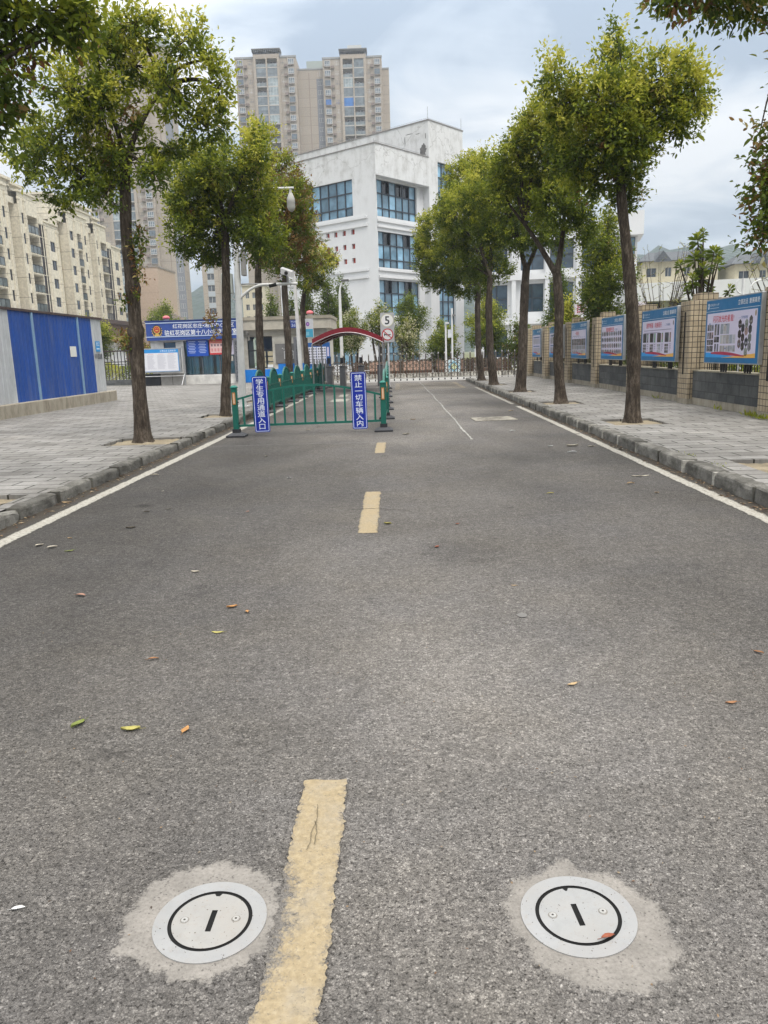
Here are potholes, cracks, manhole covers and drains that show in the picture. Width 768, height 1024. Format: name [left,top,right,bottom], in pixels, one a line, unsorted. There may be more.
crack [306,804,318,850]
manhole cover [152,882,267,964]
manhole cover [520,876,638,959]
